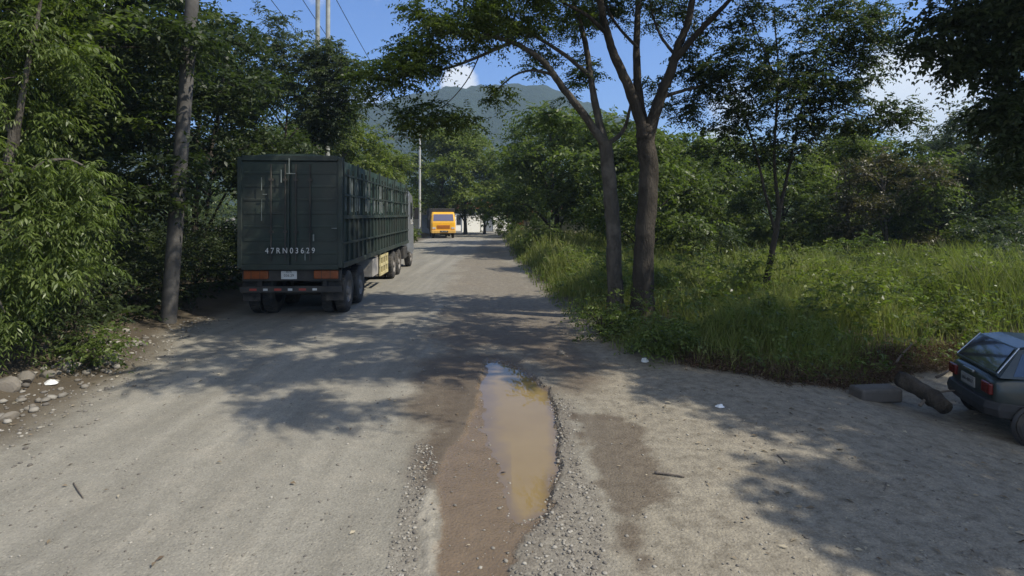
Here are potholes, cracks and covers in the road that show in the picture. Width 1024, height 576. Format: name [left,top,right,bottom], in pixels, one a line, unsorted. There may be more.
pothole [432,358,563,576]
